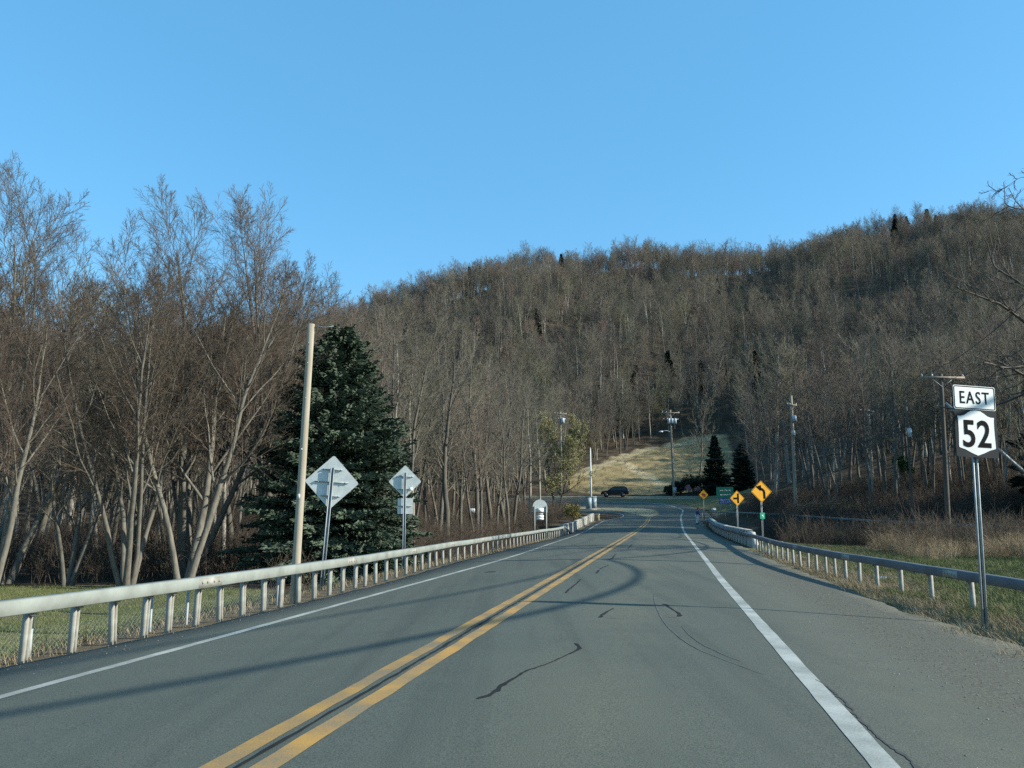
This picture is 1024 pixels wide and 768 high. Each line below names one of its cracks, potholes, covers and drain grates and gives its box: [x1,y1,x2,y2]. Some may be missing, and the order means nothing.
crack [815,679,921,768]
crack [654,594,765,675]
